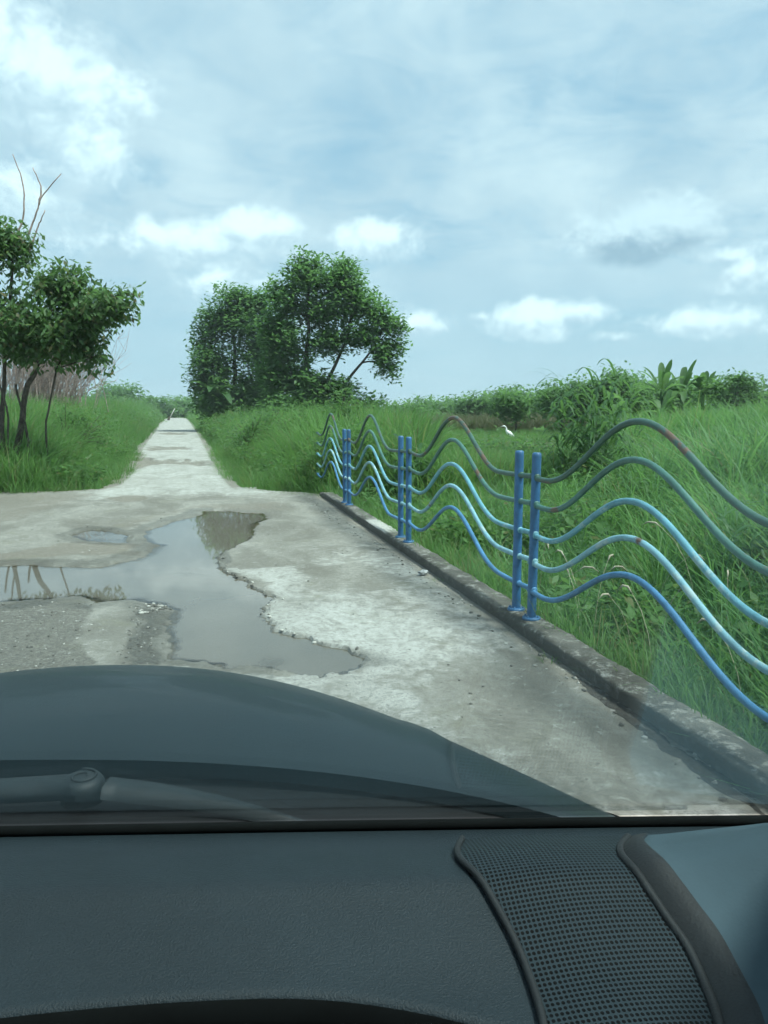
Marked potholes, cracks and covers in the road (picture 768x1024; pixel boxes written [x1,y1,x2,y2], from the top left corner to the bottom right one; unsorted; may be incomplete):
pothole [0,509,371,678]
